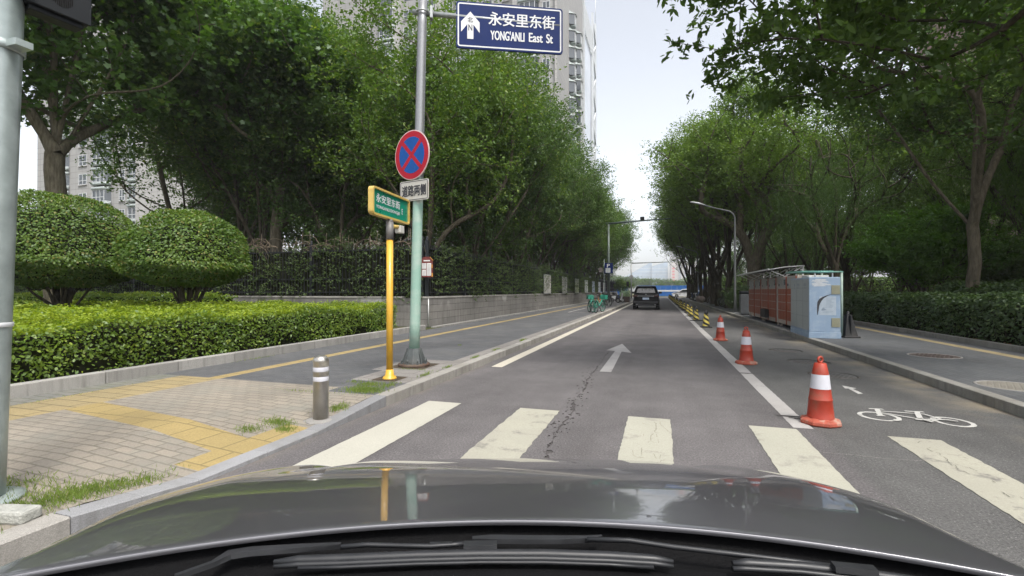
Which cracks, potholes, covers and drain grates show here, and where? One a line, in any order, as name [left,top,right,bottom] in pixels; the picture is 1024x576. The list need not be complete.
crack [543,356,605,458]
manhole cover [973,380,1024,392]
